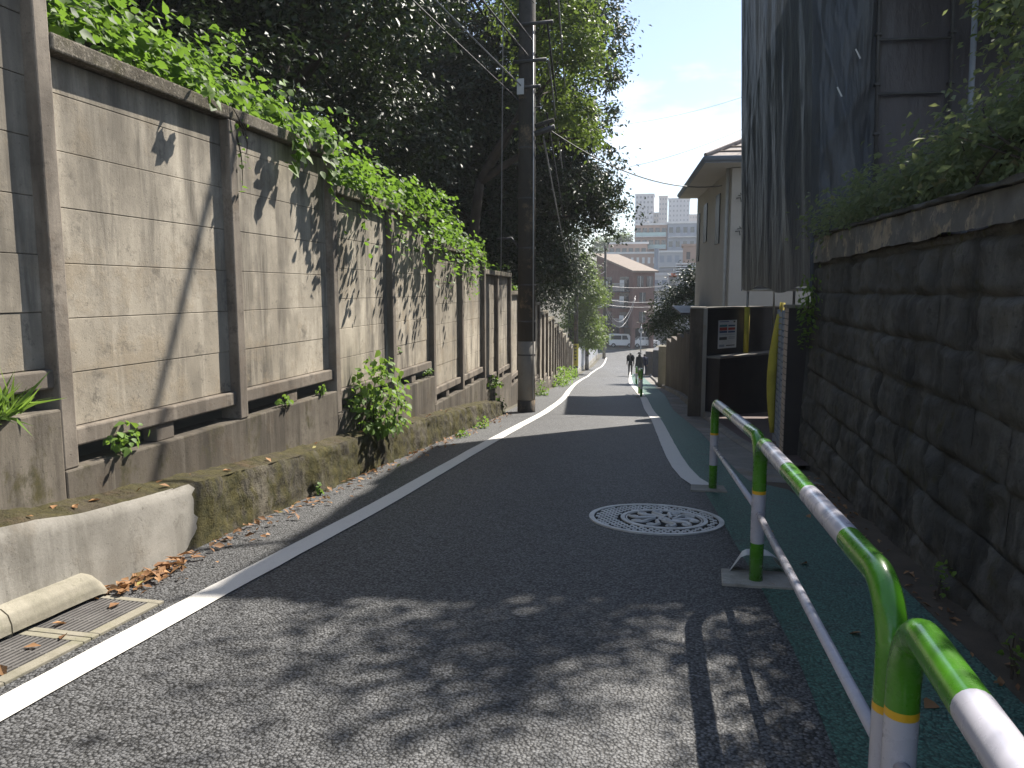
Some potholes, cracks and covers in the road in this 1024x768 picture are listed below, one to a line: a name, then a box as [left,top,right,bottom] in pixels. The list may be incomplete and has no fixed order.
manhole cover [589,503,724,536]
drain grate [21,595,164,640]
drain grate [0,630,91,688]
